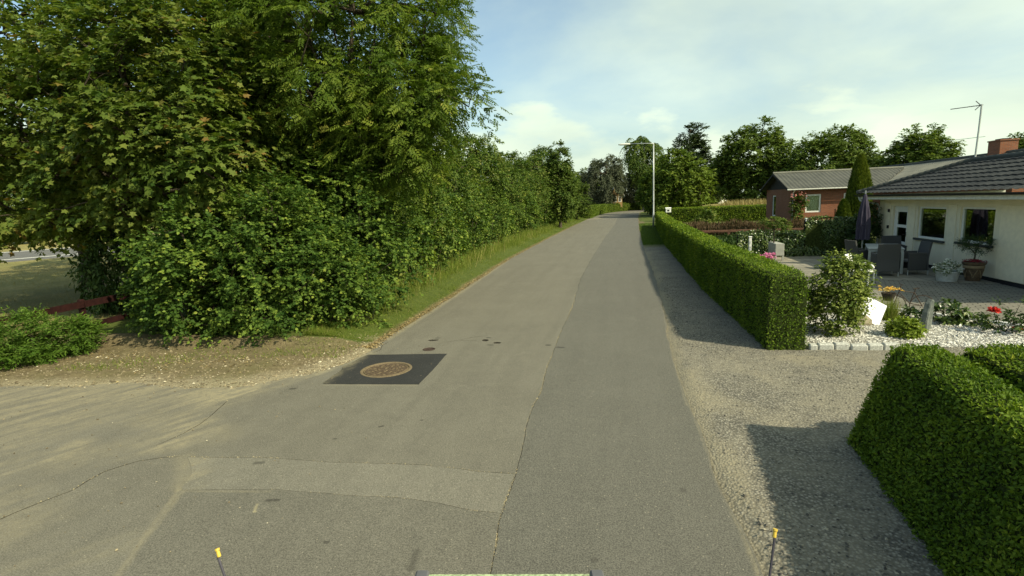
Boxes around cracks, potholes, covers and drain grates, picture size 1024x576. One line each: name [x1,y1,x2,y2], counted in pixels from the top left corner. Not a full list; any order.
crack [1,400,228,519]
manhole cover [360,362,412,378]
